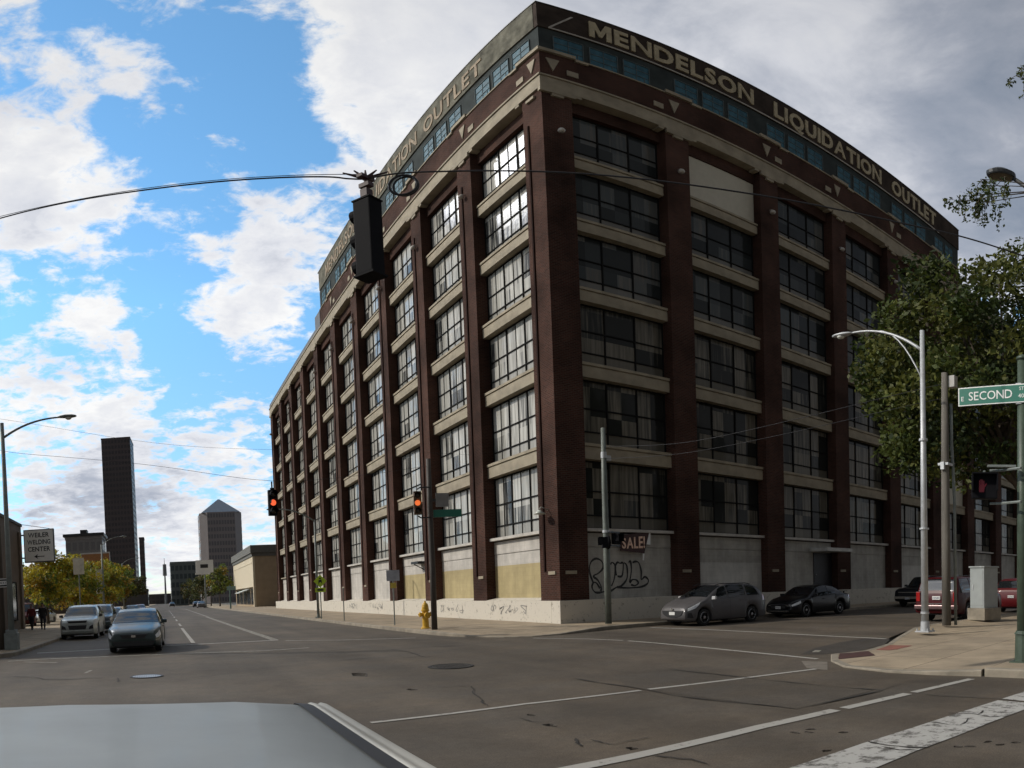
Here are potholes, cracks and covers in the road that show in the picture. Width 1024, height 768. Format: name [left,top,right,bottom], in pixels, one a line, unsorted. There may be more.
crack [518,717,707,764]
